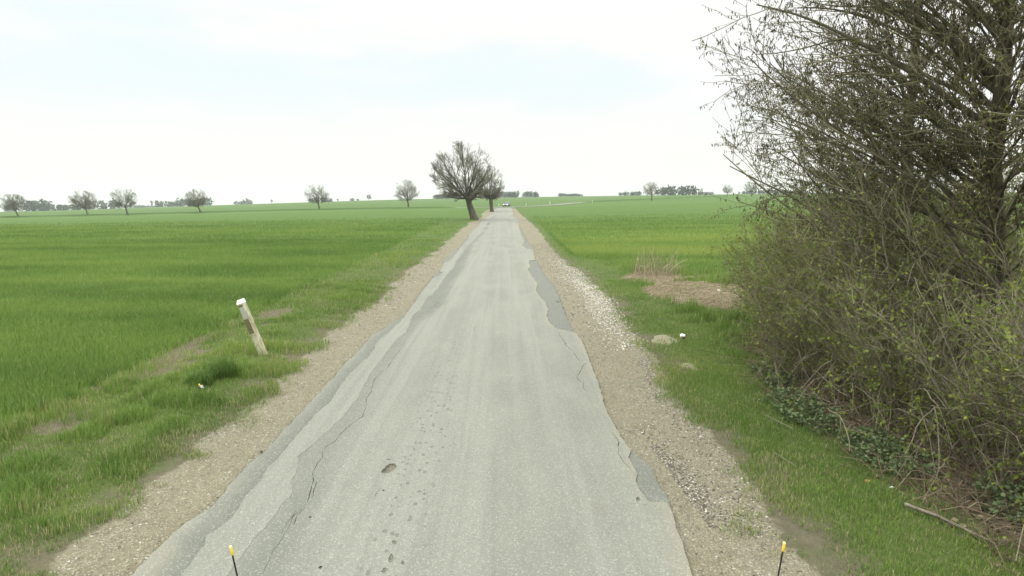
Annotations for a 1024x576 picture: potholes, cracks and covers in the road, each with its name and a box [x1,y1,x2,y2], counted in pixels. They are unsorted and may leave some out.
crack [262,342,405,575]
